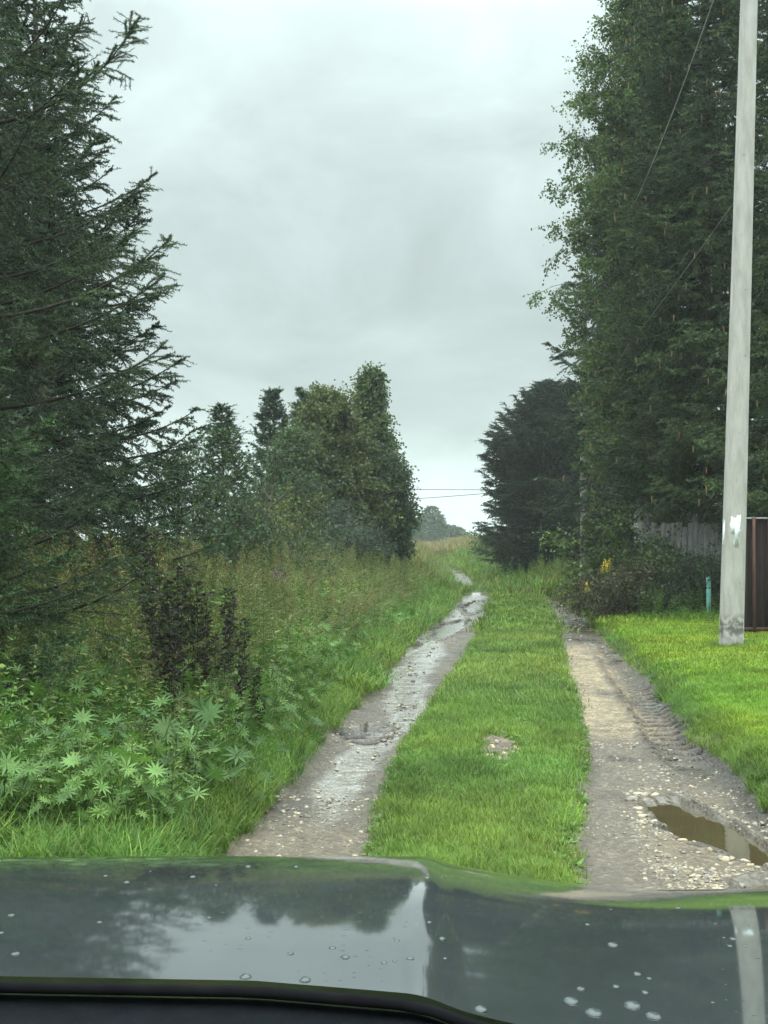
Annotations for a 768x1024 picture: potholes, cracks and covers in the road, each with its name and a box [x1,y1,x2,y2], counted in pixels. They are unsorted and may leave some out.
pothole [624,790,768,871]
pothole [327,721,401,745]
pothole [455,599,498,616]
pothole [426,618,472,641]
